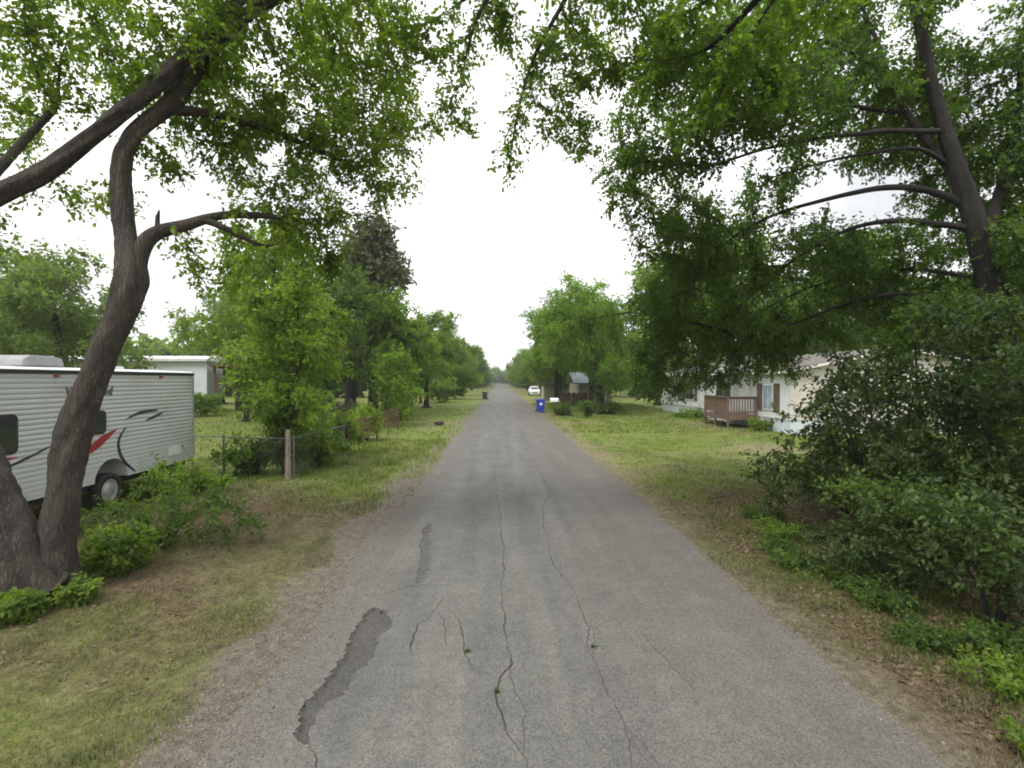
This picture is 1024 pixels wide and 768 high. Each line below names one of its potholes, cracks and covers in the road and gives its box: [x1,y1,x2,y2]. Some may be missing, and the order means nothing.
crack [381,582,473,670]
pothole [292,607,393,744]
pothole [415,522,433,584]
crack [495,480,528,768]
crack [540,467,661,768]
